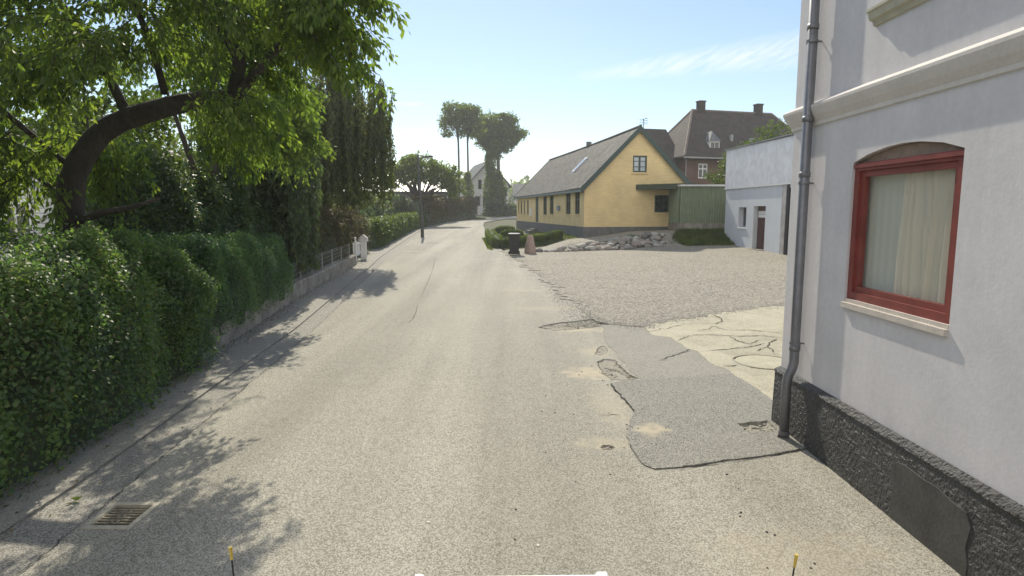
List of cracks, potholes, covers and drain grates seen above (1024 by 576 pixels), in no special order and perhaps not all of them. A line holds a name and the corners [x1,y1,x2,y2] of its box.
drain grate [79,502,162,529]
pothole [597,359,638,380]
pothole [738,420,778,432]
pothole [538,319,609,331]
crack [648,315,783,366]
